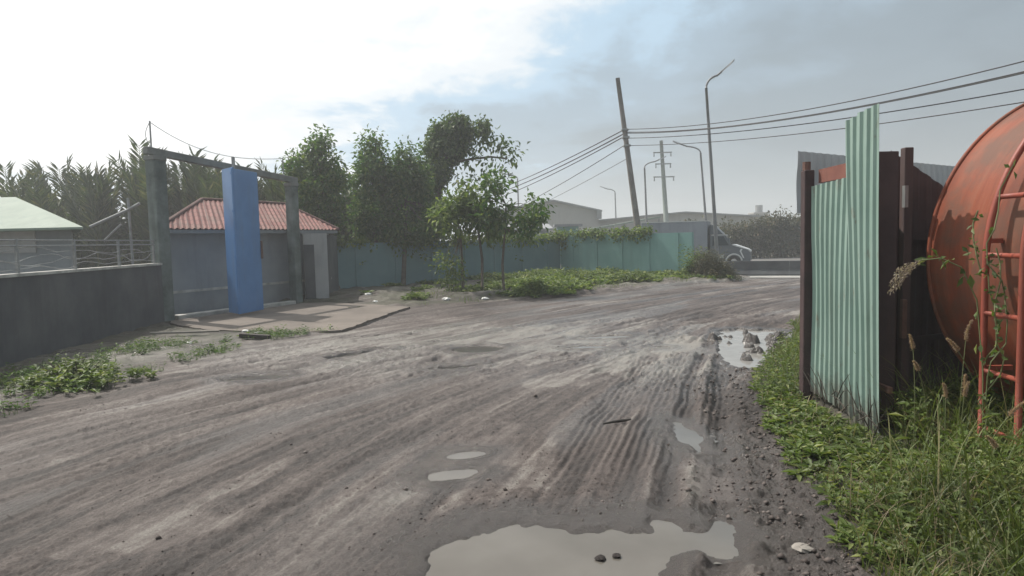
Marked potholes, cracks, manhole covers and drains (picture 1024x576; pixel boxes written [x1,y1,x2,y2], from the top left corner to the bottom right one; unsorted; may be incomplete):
pothole [445,343,512,354]
pothole [317,348,385,360]
pothole [412,463,492,485]
pothole [708,327,800,370]
pothole [397,506,776,576]
pothole [655,416,724,456]
pothole [431,446,498,462]
